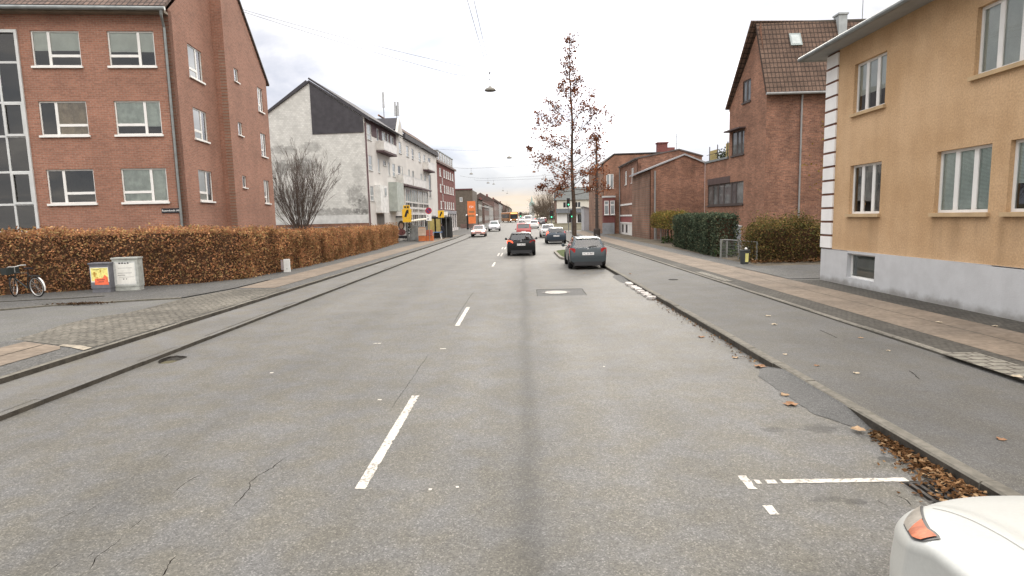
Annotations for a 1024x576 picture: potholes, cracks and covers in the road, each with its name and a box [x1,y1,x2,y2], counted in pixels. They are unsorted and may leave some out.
drain grate [898,480,967,504]
crack [163,458,285,575]
